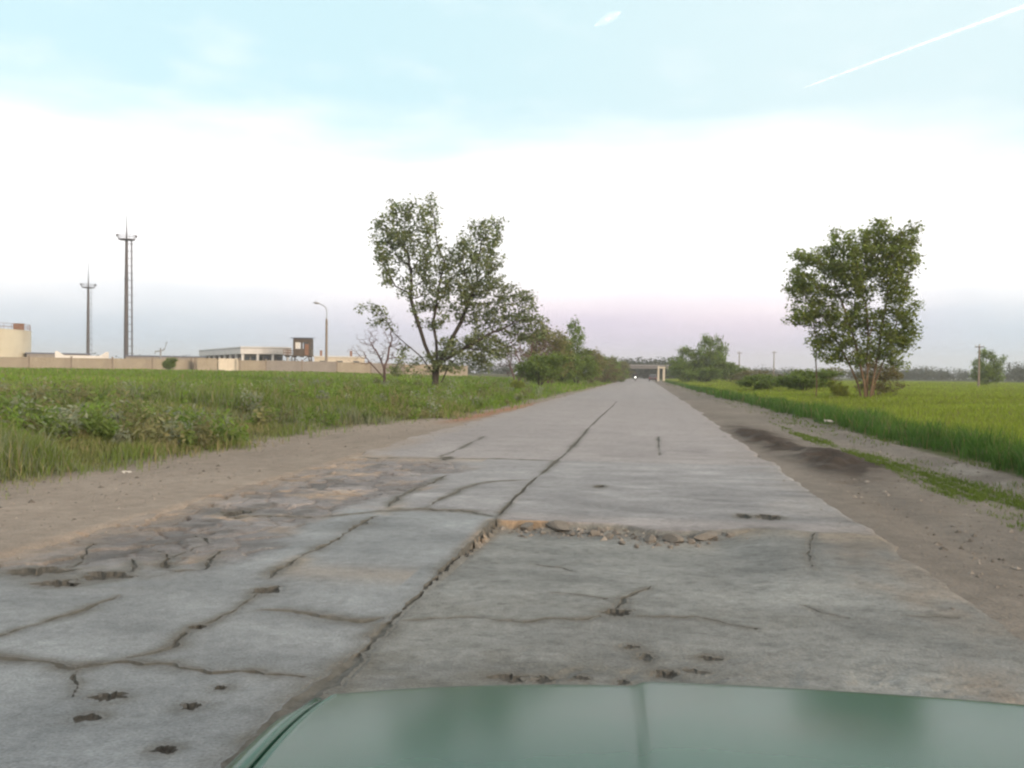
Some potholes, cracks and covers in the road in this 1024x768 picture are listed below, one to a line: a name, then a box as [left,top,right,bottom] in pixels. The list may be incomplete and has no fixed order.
pothole [83,690,133,703]
pothole [66,712,107,725]
pothole [484,673,541,685]
crack [804,532,817,570]
crack [400,586,755,629]
pothole [143,744,184,757]
pothole [520,674,557,684]
pothole [650,669,680,681]
pothole [634,652,656,663]
crack [0,436,553,697]
pothole [177,701,208,712]
pothole [679,667,716,677]
